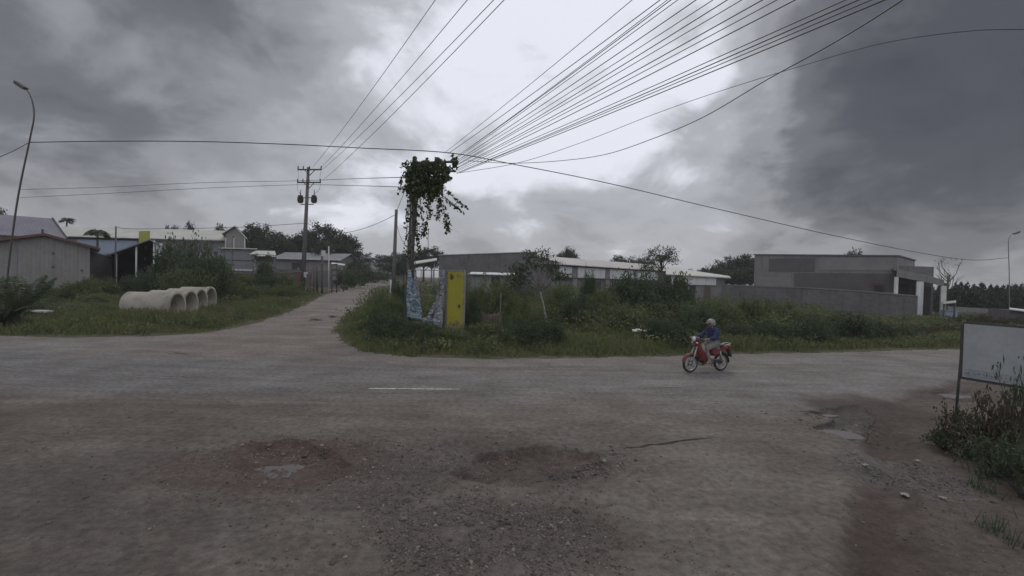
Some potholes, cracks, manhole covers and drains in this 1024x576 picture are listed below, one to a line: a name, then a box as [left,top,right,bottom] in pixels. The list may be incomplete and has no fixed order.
pothole [797,403,876,443]
pothole [227,436,359,486]
pothole [438,445,614,487]
pothole [930,390,983,403]
crack [601,435,725,456]
